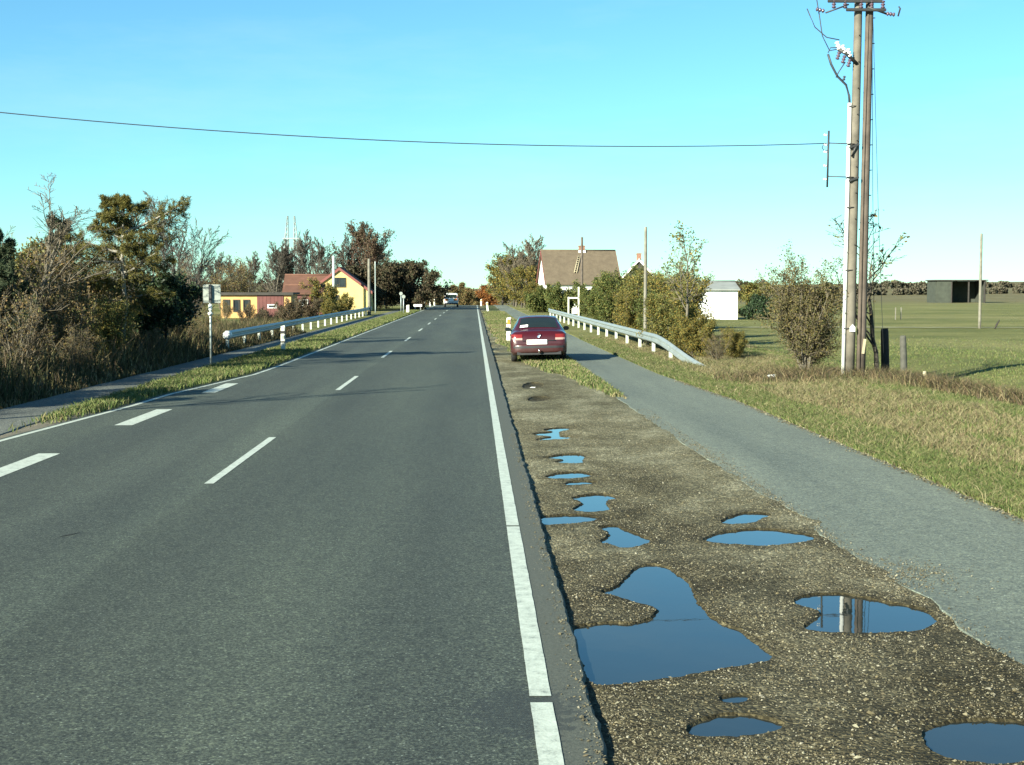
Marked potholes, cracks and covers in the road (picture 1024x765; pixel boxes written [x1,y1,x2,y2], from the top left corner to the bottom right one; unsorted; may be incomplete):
pothole [686,712,786,737]
pothole [703,528,815,546]
pothole [572,493,617,512]
pothole [540,514,600,525]
pothole [720,511,771,524]
pothole [794,592,939,633]
pothole [718,693,751,703]
pothole [599,525,651,547]
pothole [533,427,573,440]
pothole [545,471,593,479]
pothole [543,453,586,463]
pothole [572,563,775,685]
